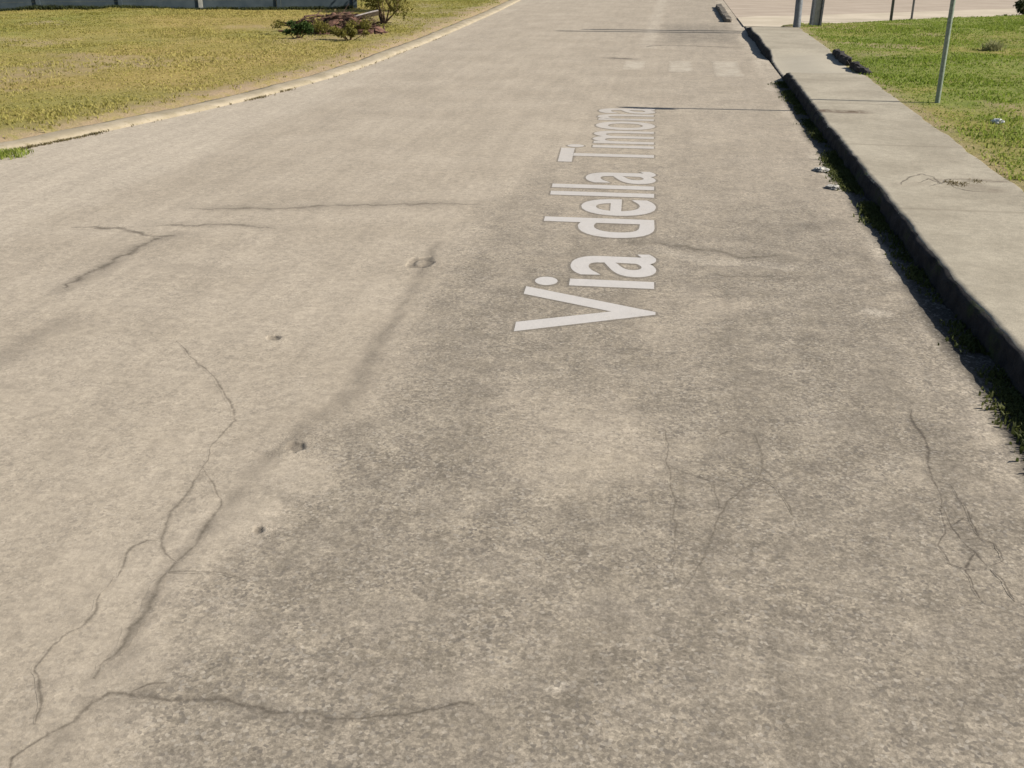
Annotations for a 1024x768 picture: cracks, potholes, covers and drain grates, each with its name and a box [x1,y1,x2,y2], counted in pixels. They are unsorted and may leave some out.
crack [62,202,480,288]
crack [6,341,480,768]
pothole [241,523,282,542]
crack [664,426,793,592]
crack [908,409,1015,605]
